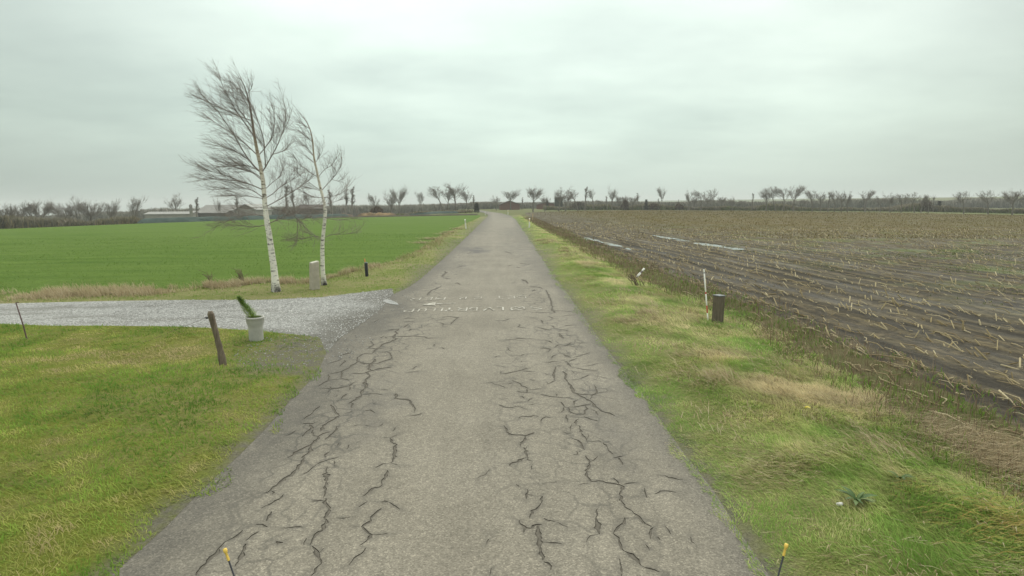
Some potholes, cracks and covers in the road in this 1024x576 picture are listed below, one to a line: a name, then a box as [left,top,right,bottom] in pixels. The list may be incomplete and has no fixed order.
crack [196,316,458,576]
crack [489,252,696,576]
